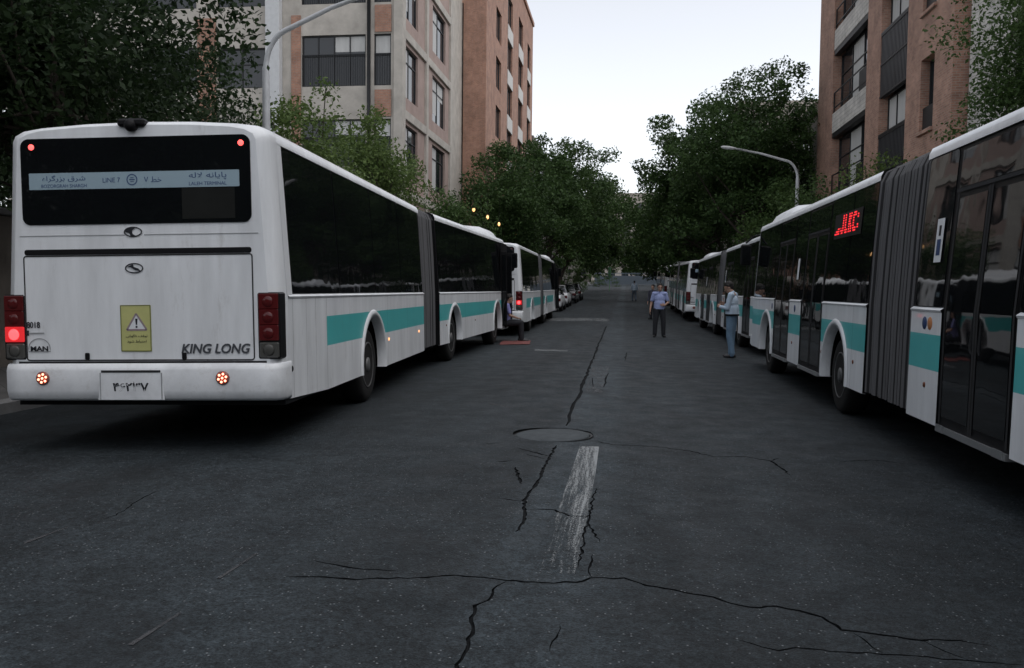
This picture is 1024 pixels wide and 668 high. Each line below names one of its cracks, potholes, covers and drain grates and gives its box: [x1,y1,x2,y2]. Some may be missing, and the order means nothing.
manhole cover [513,428,593,442]
crack [297,445,1020,668]
crack [566,326,790,475]
